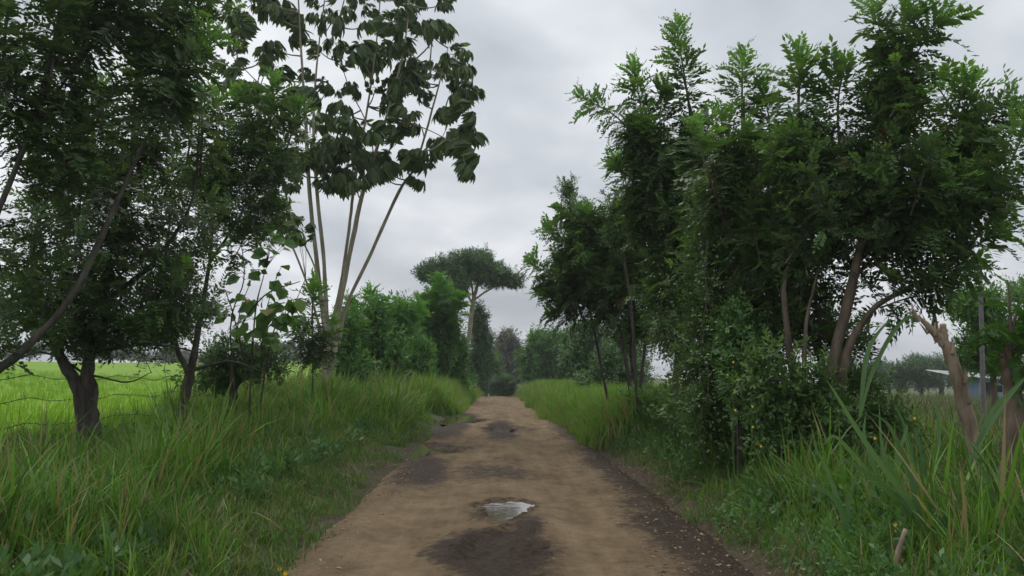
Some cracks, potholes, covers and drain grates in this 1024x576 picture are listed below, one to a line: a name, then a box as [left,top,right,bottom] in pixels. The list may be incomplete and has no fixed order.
pothole [479,422,540,434]
pothole [468,497,539,524]
